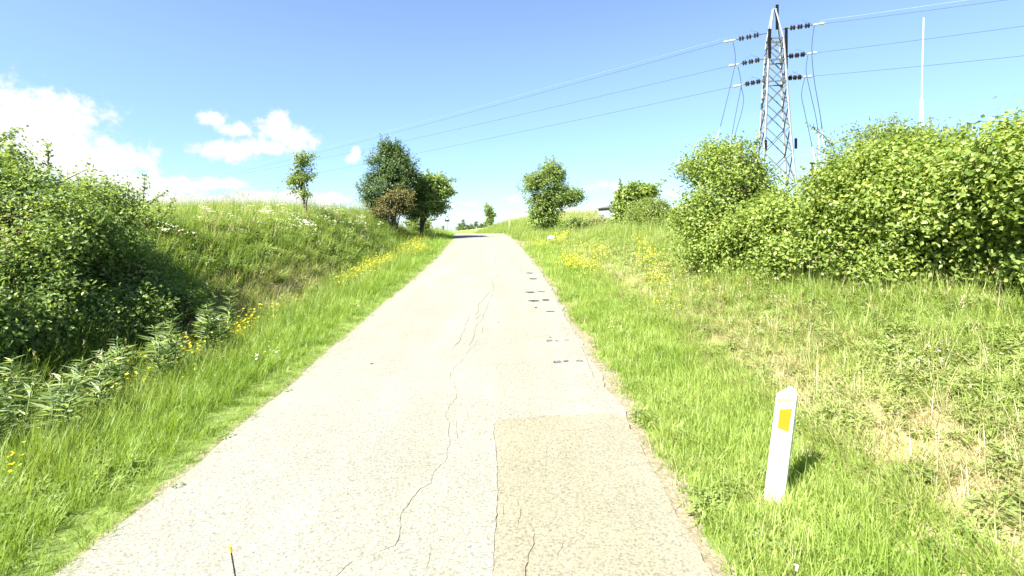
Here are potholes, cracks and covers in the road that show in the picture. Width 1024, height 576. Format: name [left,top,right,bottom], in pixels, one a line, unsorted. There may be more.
crack [503,494,535,576]
crack [338,258,498,575]
